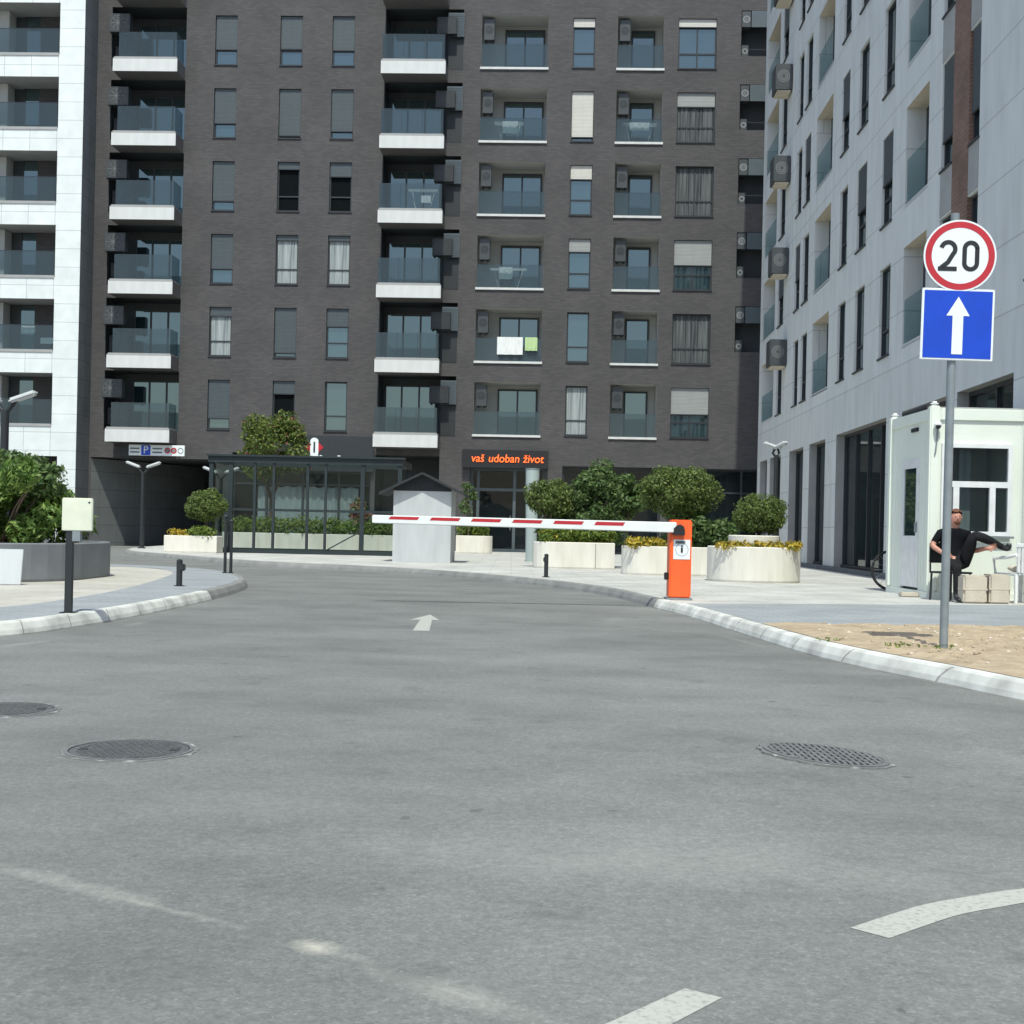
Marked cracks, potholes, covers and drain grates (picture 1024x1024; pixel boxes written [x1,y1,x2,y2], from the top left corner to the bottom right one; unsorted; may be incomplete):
manhole cover [756,742,896,770]
manhole cover [59,739,200,762]
manhole cover [0,702,62,718]
